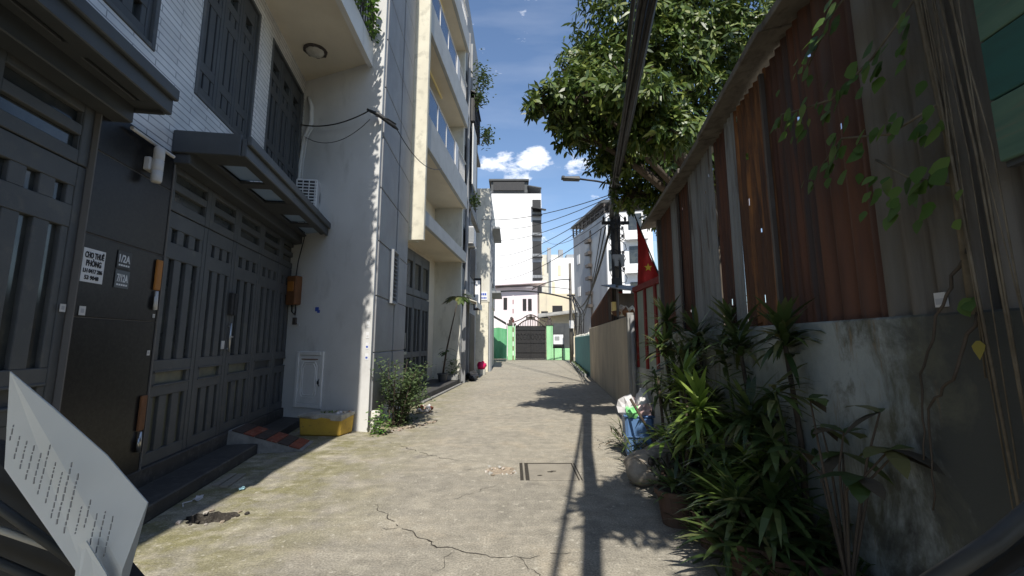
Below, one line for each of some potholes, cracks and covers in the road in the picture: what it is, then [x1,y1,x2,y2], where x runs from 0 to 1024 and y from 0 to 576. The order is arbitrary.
manhole cover [519,463,583,480]
pothole [175,509,250,526]
crack [376,504,567,576]
